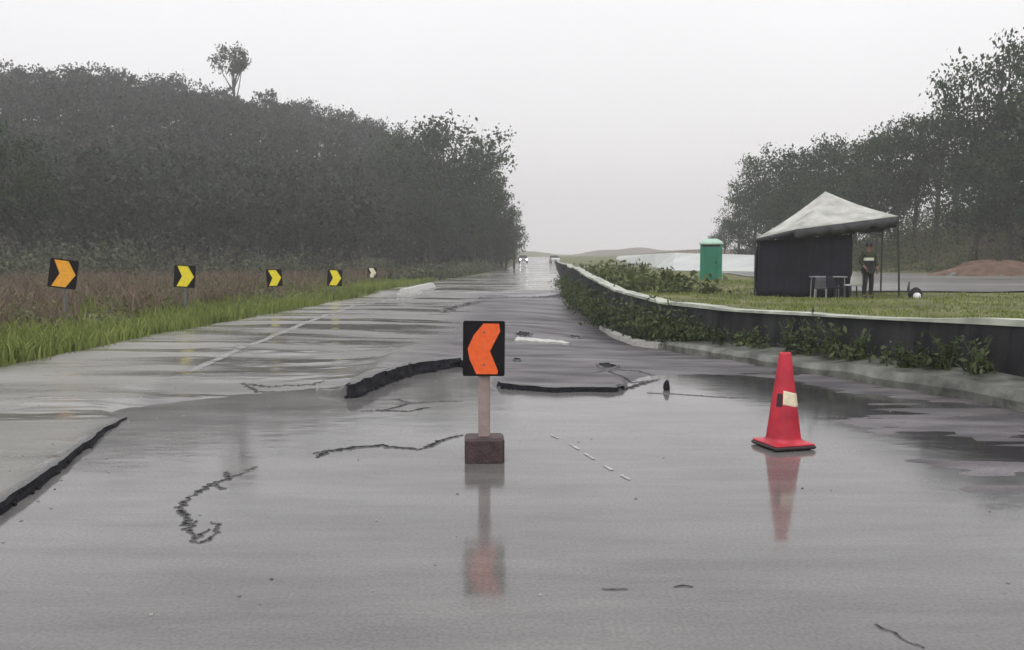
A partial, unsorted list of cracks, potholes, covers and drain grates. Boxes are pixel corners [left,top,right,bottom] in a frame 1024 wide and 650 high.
crack [344,357,463,412]
crack [496,369,753,398]
crack [874,623,923,648]
crack [240,380,325,393]
crack [174,466,258,544]
crack [314,434,464,458]
